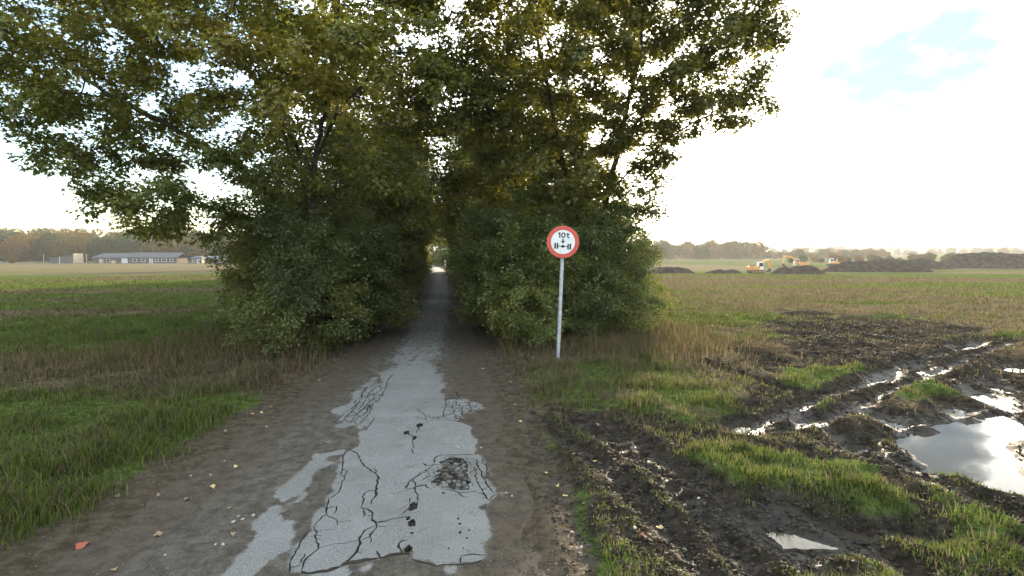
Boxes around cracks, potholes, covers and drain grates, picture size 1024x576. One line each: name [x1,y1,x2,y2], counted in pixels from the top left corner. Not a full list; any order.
pothole [430,458,470,493]
crack [289,374,481,574]
